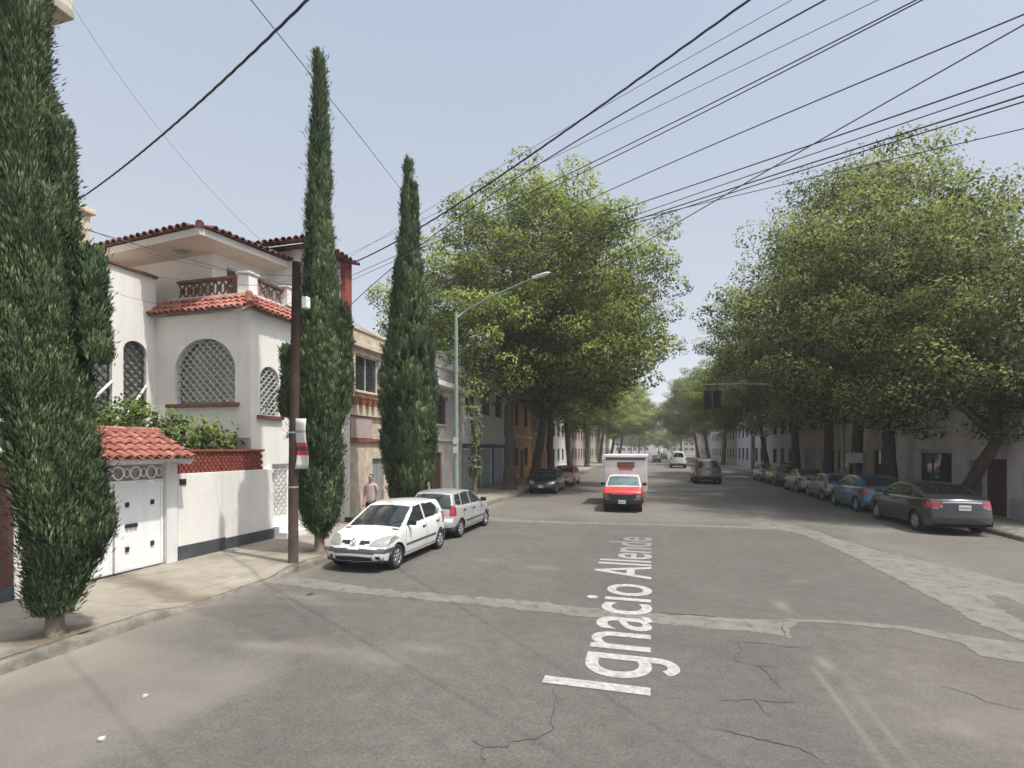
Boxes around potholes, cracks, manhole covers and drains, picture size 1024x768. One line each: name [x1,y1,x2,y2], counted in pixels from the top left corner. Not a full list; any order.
crack [472,687,557,768]
crack [712,729,826,764]
crack [732,641,806,716]
